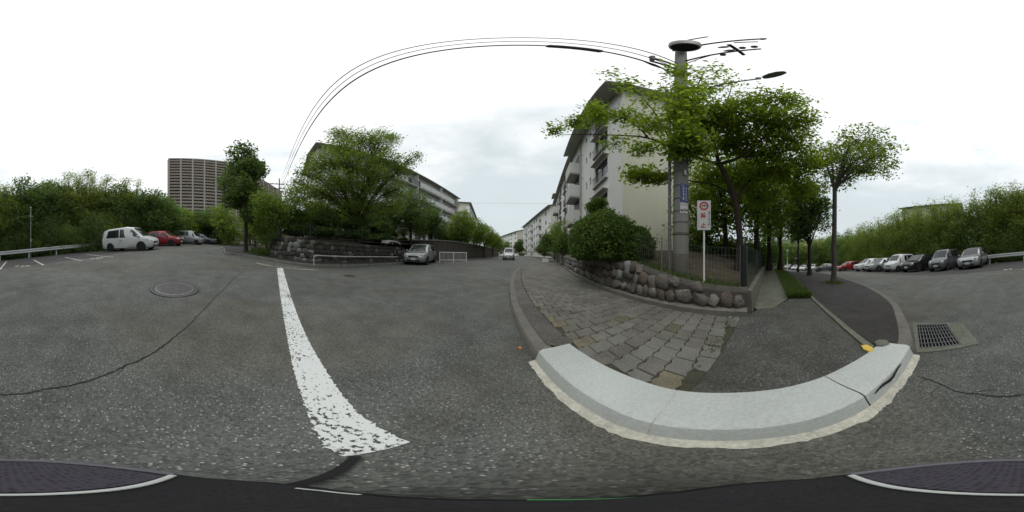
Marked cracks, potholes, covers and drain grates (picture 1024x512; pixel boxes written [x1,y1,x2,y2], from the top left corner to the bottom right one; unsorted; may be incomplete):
drain grate [913,322,980,353]
manhole cover [150,282,199,298]
